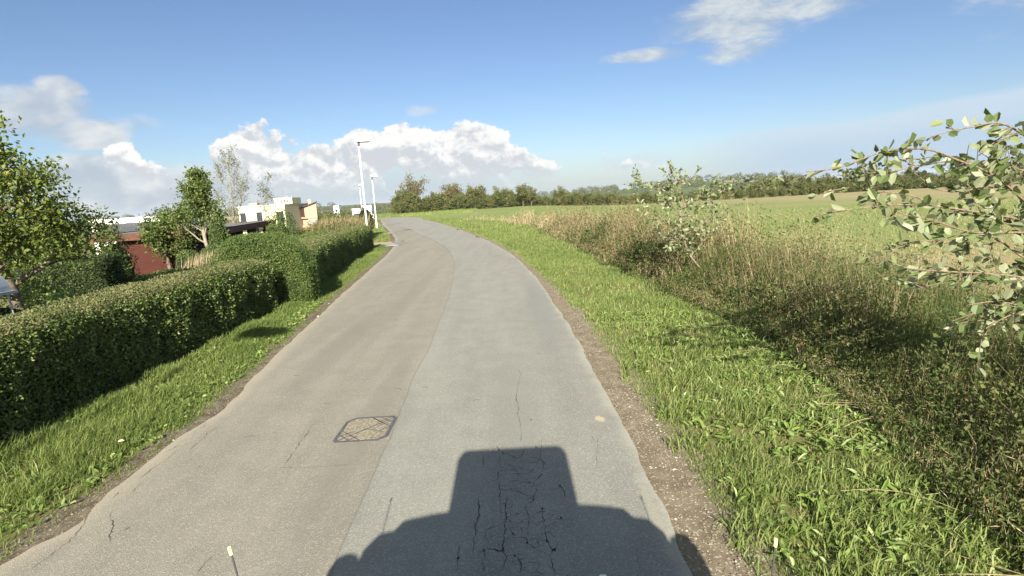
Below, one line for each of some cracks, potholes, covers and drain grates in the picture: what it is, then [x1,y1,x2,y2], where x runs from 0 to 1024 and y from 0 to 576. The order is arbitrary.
crack [456,370,574,576]
manhole cover [333,415,397,443]
